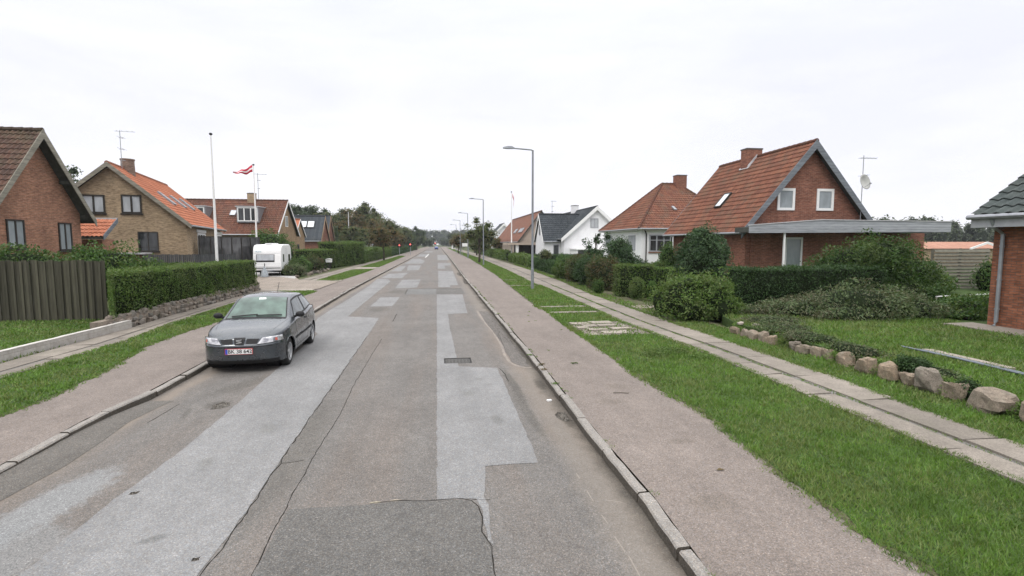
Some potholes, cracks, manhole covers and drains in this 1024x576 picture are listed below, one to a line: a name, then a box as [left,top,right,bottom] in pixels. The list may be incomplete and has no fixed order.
pothole [555,412,572,422]
